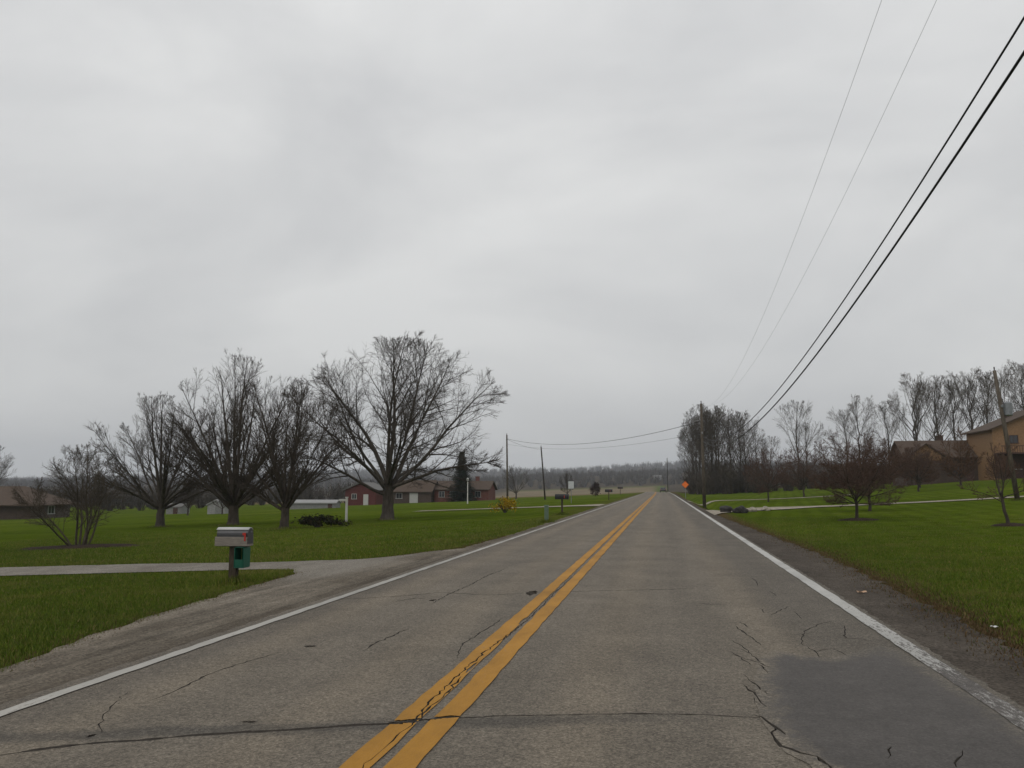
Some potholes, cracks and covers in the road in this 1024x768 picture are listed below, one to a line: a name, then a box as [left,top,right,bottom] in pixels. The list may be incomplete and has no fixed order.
crack [0,569,865,768]
